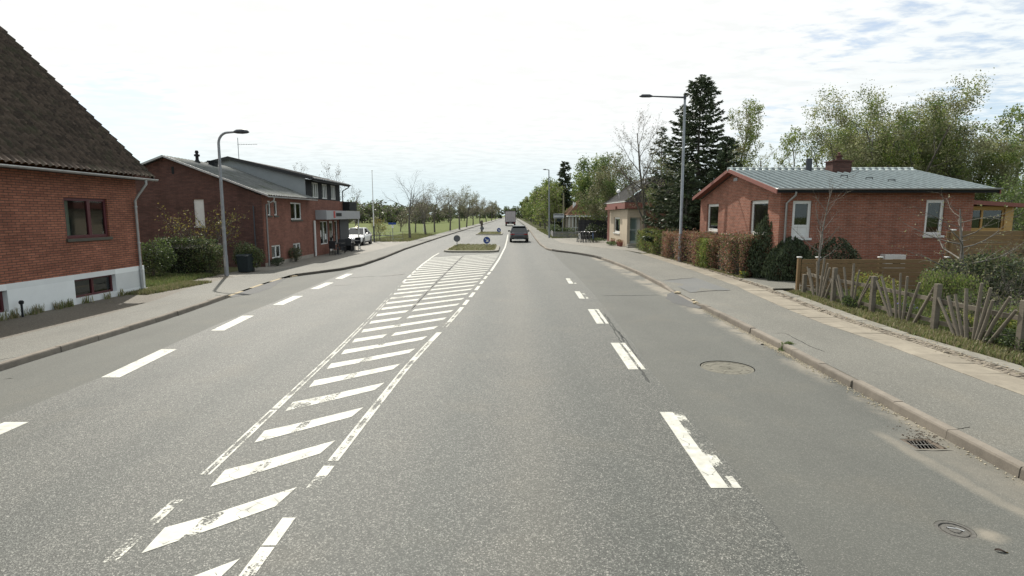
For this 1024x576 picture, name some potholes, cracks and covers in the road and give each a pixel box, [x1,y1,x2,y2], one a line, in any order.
manhole cover [700,361,755,375]
crack [604,314,650,383]
drain grate [900,439,952,451]
manhole cover [934,521,977,539]
